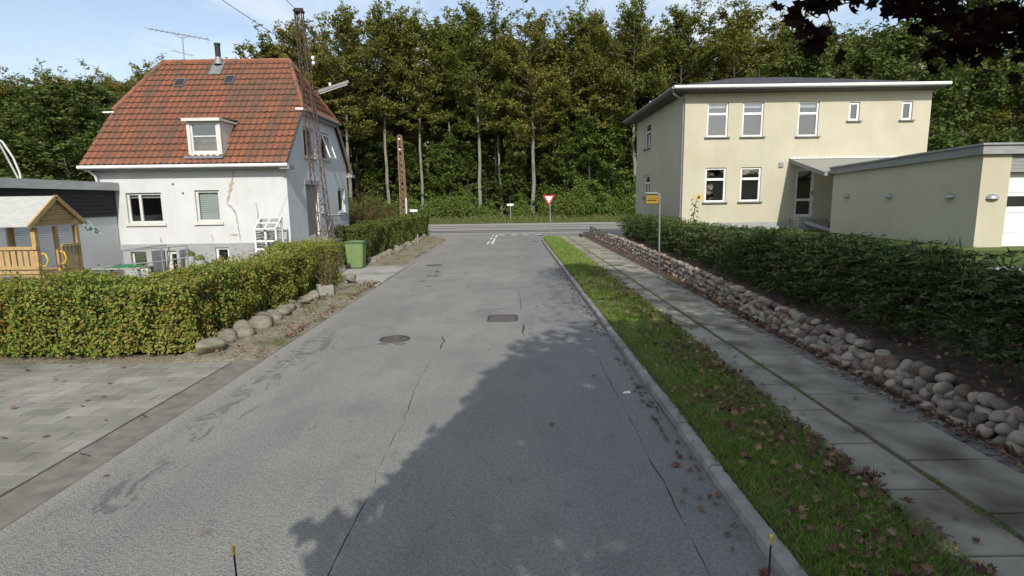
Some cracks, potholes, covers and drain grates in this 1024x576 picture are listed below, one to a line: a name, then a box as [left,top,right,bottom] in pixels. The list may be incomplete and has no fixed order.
crack [406,273,567,335]
manhole cover [487,314,518,322]
manhole cover [379,335,411,343]
crack [595,354,710,575]
crack [327,336,445,576]
